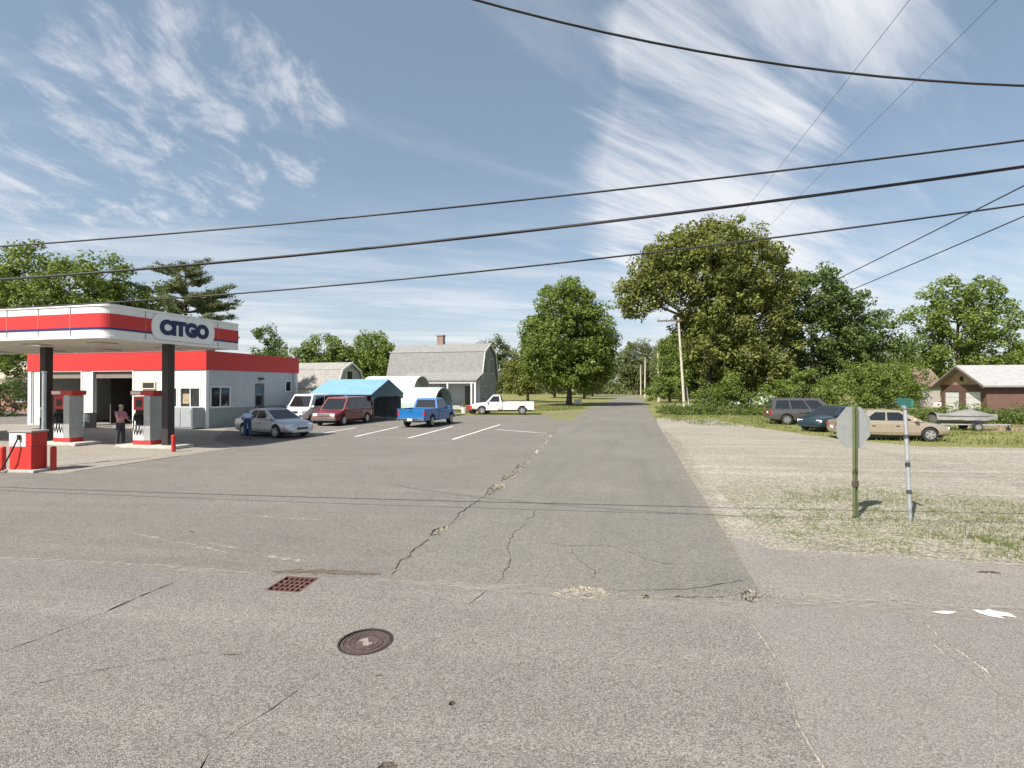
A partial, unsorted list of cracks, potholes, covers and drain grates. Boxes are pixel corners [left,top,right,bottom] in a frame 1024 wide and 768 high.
pothole [545,586,610,599]
crack [455,510,536,605]
pothole [484,483,506,497]
drain grate [266,576,318,592]
crack [544,542,678,579]
crack [743,614,825,768]
crack [200,674,319,768]
crack [637,580,743,591]
pothole [500,470,520,482]
manhole cover [337,628,394,656]
crack [1,582,175,653]
pothole [740,589,763,603]
